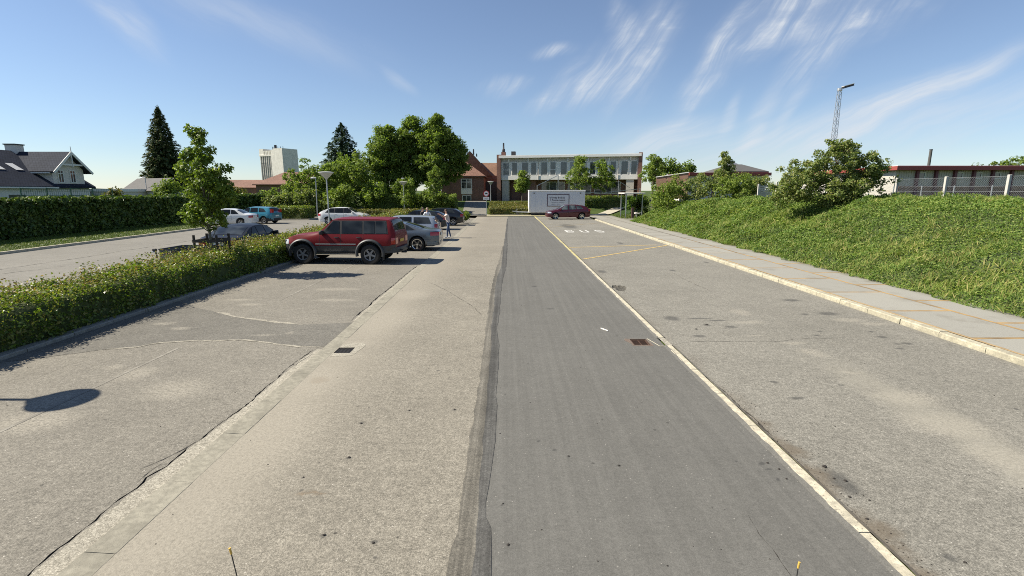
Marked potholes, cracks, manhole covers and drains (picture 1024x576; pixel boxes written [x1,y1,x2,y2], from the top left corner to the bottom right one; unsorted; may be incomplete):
crack [27,351,311,576]
crack [352,266,481,320]
